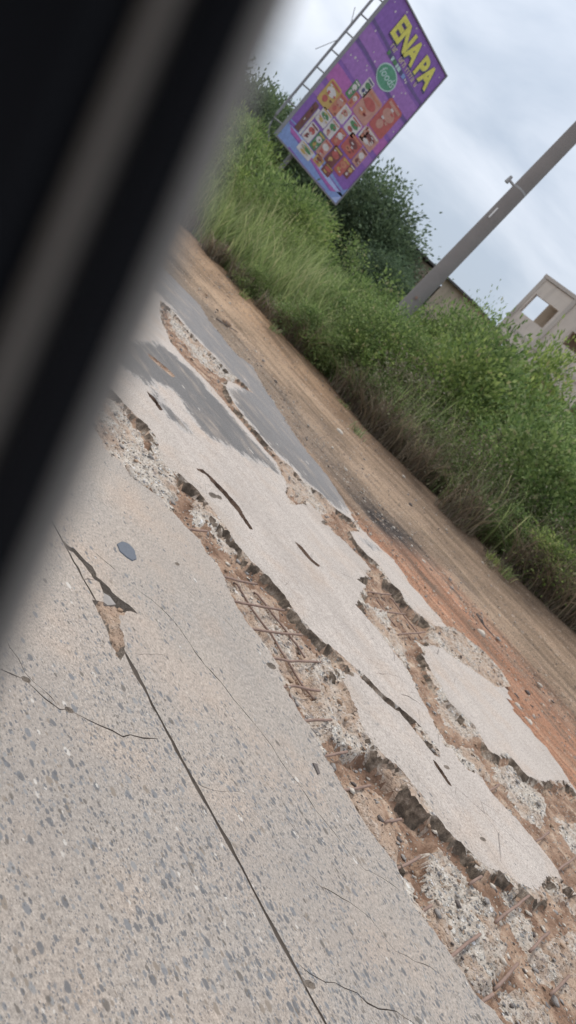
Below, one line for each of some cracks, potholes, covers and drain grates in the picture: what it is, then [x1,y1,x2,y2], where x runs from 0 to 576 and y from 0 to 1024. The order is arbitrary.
crack [7,654,157,739]
pothole [334,763,576,1024]
crack [134,587,399,890]
pothole [215,562,392,780]
pothole [355,570,510,718]
pothole [330,647,441,758]
pothole [104,402,260,573]
pothole [430,712,576,895]
pothole [160,304,344,517]
